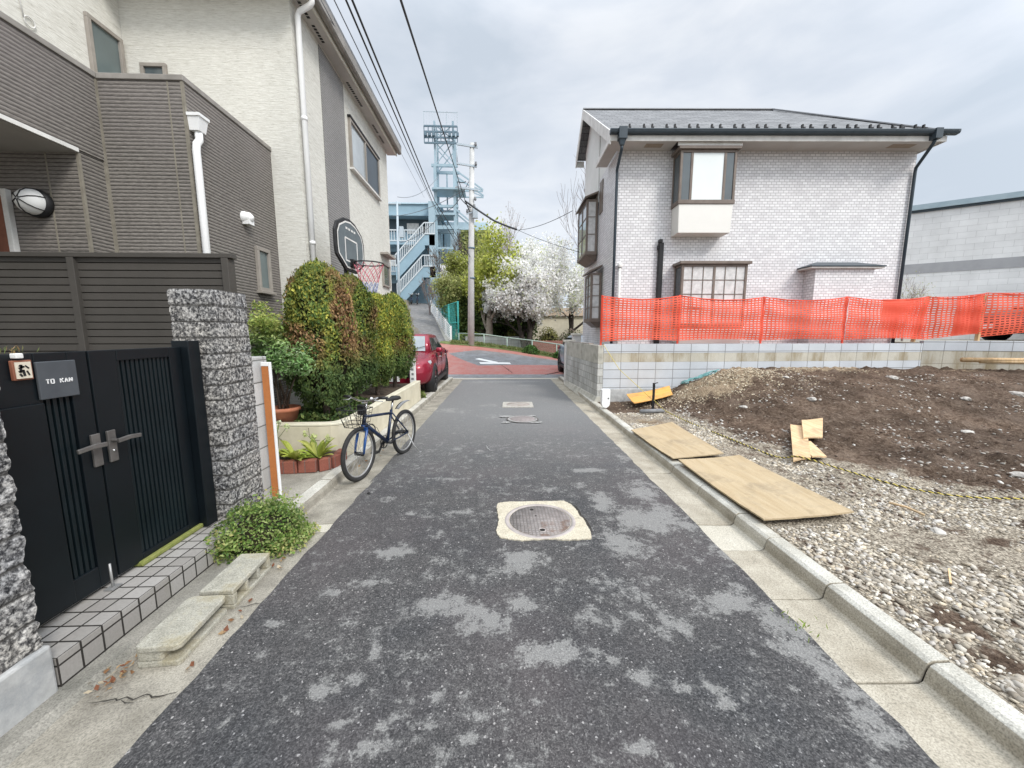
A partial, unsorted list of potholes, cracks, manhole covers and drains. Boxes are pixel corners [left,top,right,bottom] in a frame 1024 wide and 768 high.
manhole cover [496,501,592,541]
crack [91,692,176,704]
manhole cover [499,415,543,423]
